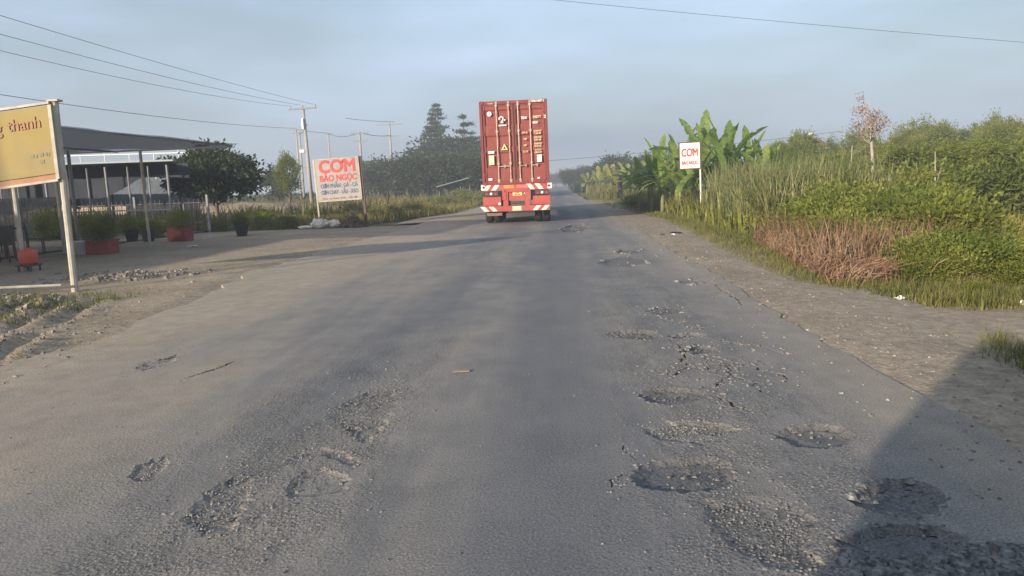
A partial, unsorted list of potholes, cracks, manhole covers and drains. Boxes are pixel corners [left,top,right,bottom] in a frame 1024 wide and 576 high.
pothole [115,449,191,484]
crack [715,284,744,305]
pothole [597,256,650,267]
pothole [623,456,773,495]
pothole [772,423,871,449]
crack [180,360,236,381]
pothole [617,471,888,575]
pothole [824,521,982,563]
pothole [282,466,354,506]
pothole [113,349,194,377]
pothole [833,477,951,520]
pothole [602,329,661,341]
